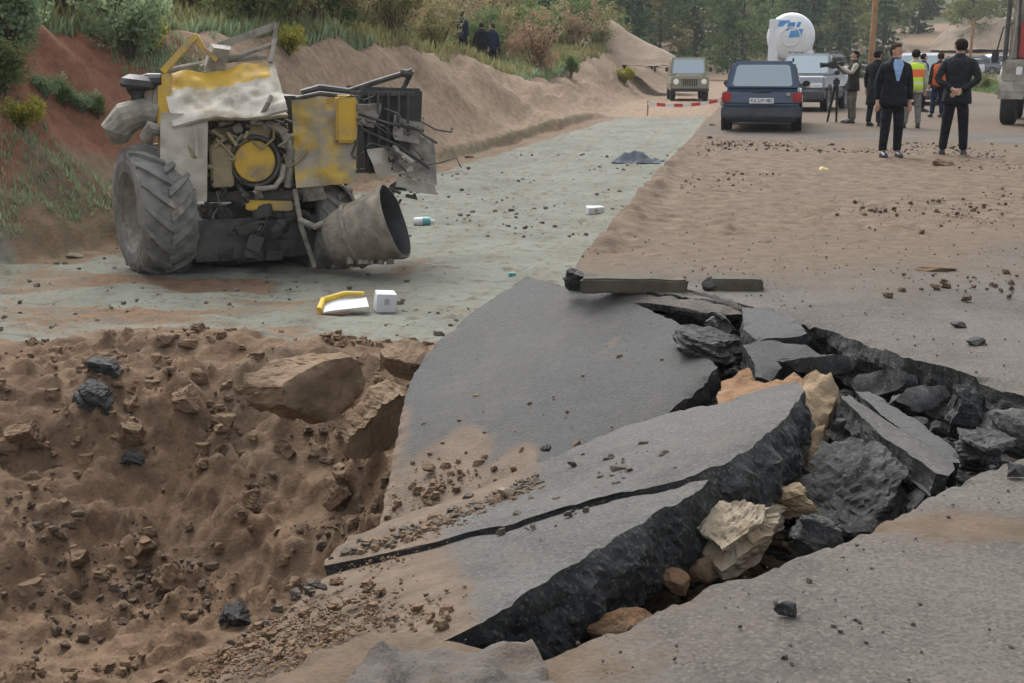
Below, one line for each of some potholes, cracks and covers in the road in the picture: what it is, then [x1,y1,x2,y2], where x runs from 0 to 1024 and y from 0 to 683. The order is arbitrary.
pothole [0,325,411,683]
crack [324,470,707,575]
